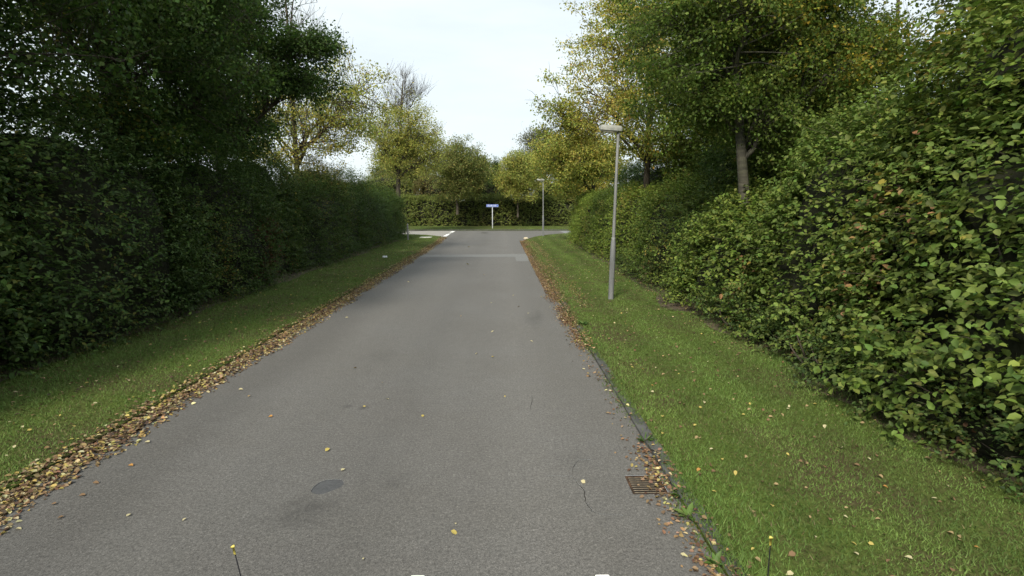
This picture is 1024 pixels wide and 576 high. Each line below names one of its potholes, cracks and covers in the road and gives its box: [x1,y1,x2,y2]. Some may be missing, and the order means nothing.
drain grate [624,476,668,517]
